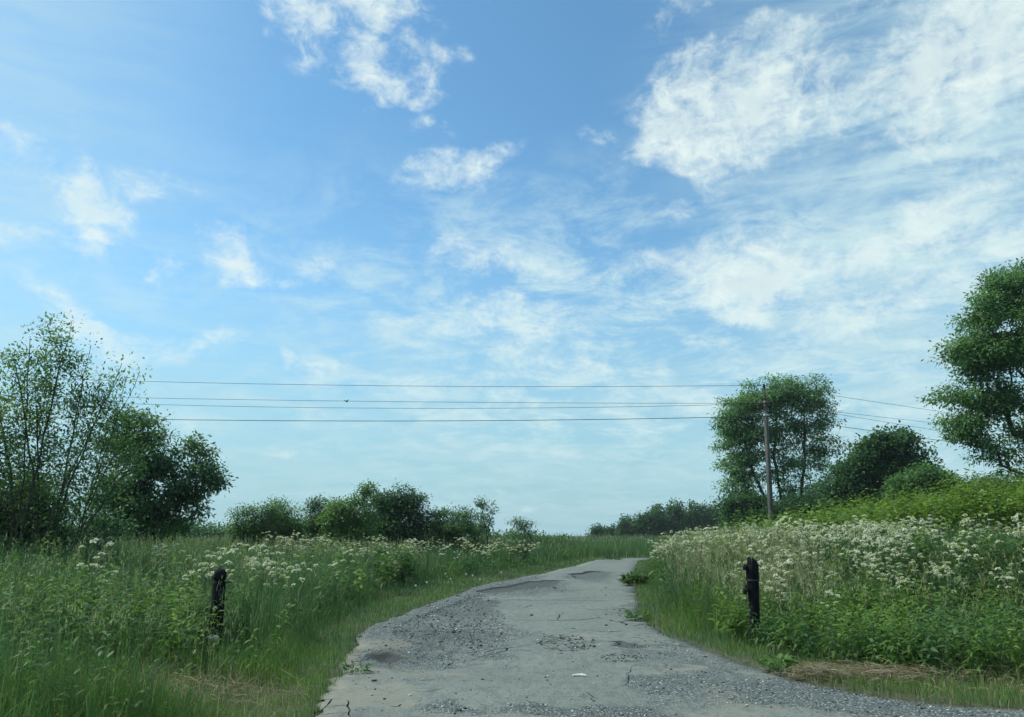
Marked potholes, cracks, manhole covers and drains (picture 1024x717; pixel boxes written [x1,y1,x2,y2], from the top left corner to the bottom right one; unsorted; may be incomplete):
pothole [611,641,649,649]
pothole [568,571,614,580]
pothole [474,580,564,593]
crack [314,698,351,717]
crack [485,598,660,686]
pothole [362,651,411,663]
